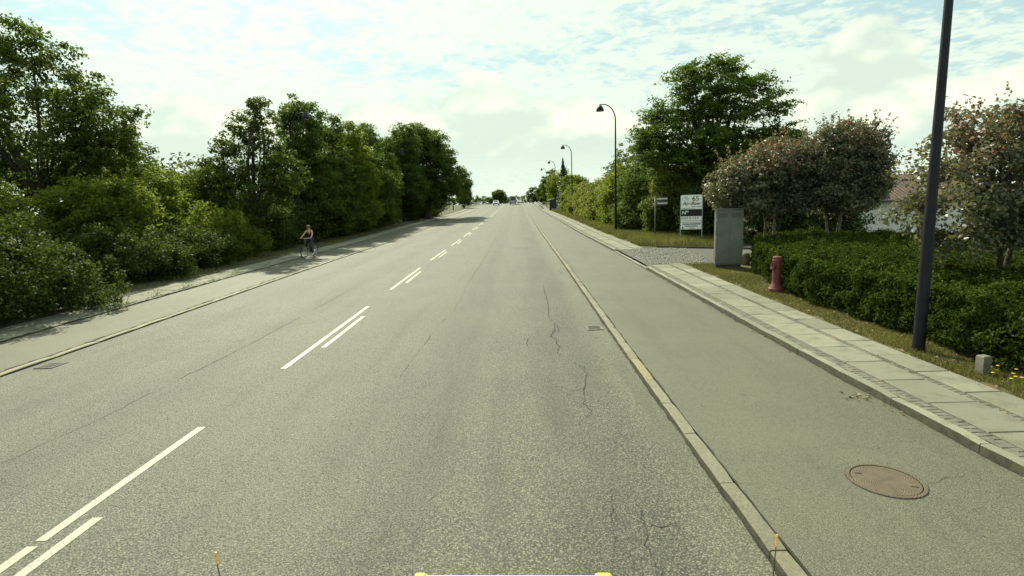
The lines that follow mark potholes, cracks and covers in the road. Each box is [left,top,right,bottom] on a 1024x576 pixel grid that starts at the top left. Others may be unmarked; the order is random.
manhole cover [845,463,929,500]
crack [640,507,669,576]
crack [544,272,569,353]
